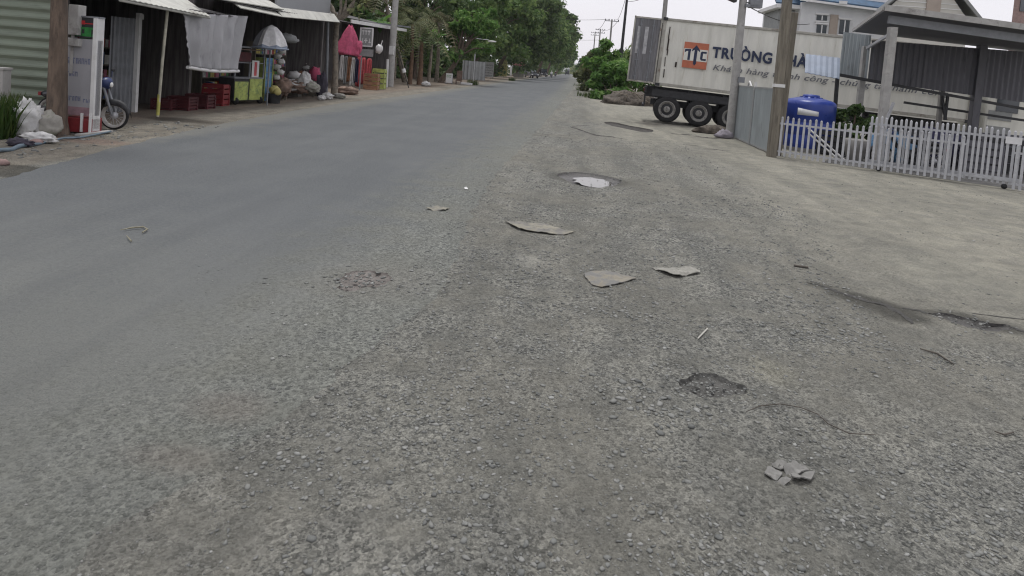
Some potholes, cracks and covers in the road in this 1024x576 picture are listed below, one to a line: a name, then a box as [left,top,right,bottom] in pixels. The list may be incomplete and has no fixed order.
pothole [678,373,748,398]
pothole [604,122,653,132]
pothole [557,172,621,188]
crack [807,282,1024,332]
